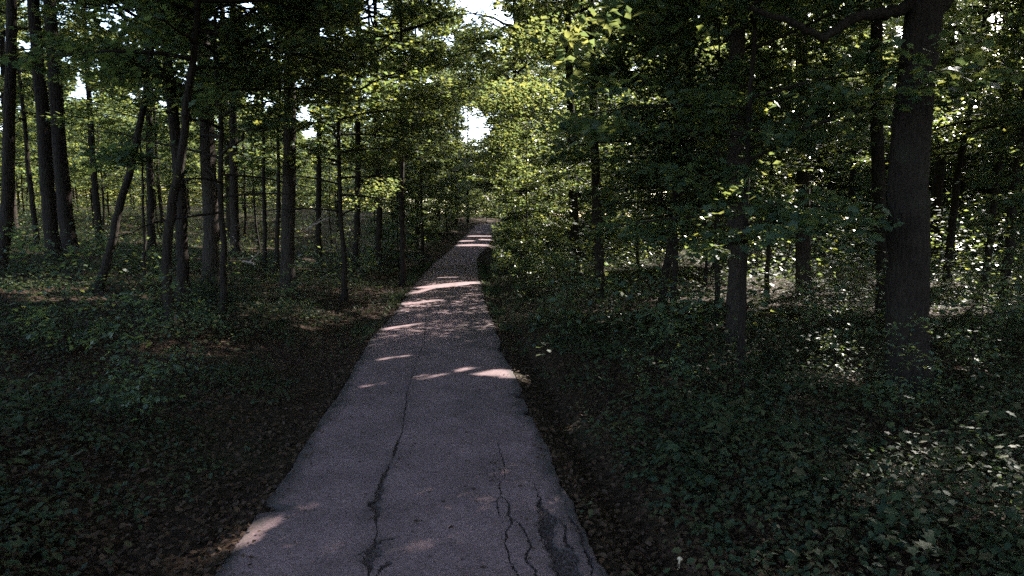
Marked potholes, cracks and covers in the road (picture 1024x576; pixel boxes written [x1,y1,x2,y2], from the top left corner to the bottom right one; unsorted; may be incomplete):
crack [492,442,595,576]
crack [358,319,426,576]
